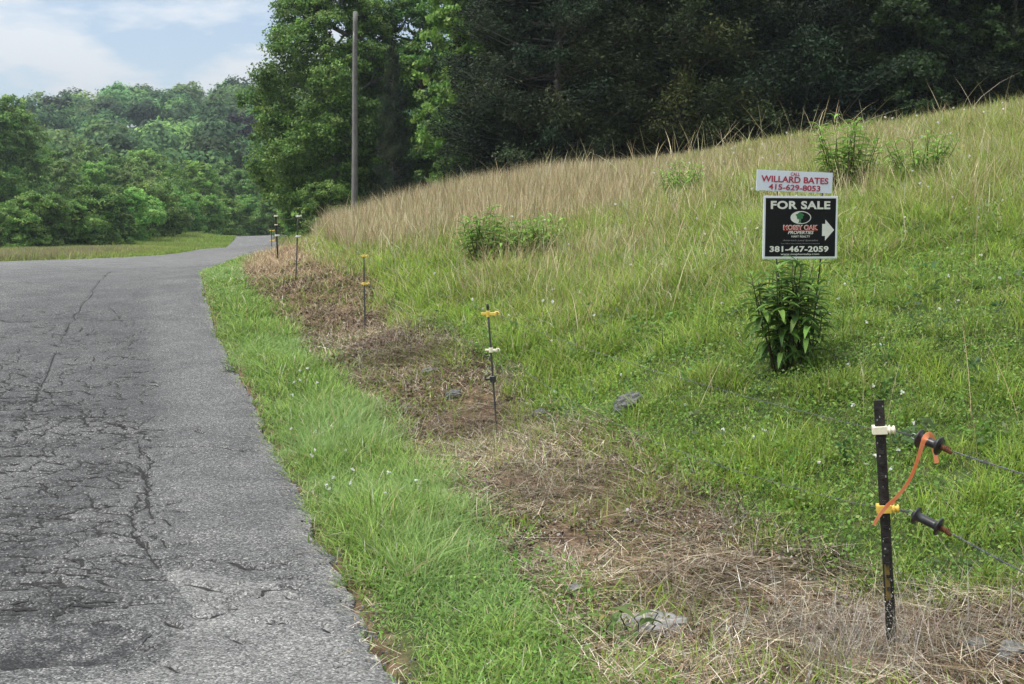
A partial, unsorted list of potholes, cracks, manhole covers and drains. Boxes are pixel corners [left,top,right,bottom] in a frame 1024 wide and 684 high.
crack [164,562,331,645]
crack [0,311,198,645]
